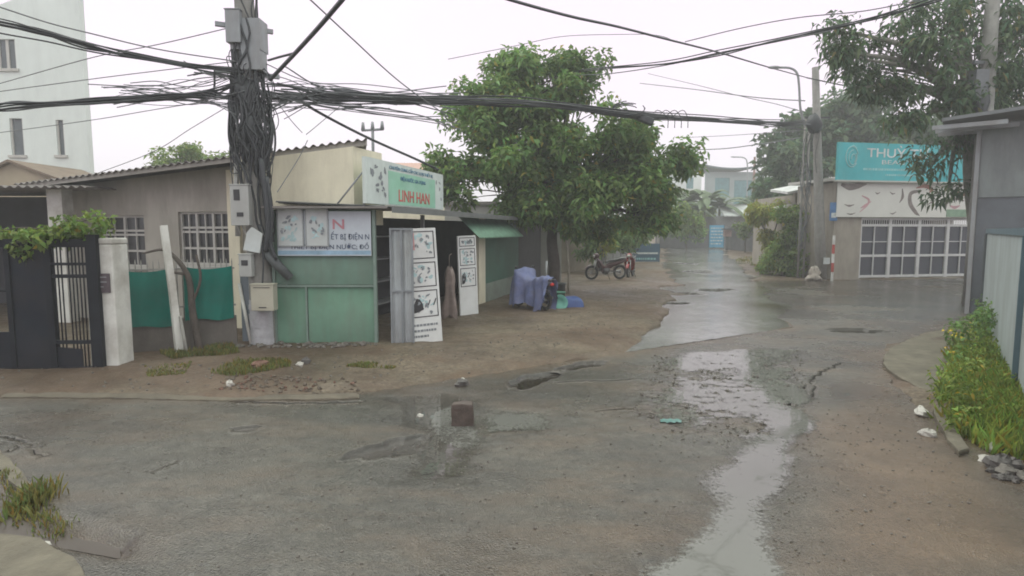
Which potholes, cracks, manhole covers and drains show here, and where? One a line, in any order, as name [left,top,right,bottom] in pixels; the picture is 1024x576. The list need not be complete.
pothole [549,360,611,374]
pothole [334,432,438,462]
crack [147,460,186,474]
pothole [504,370,570,391]
crack [696,356,849,432]
pothole [224,424,269,434]
